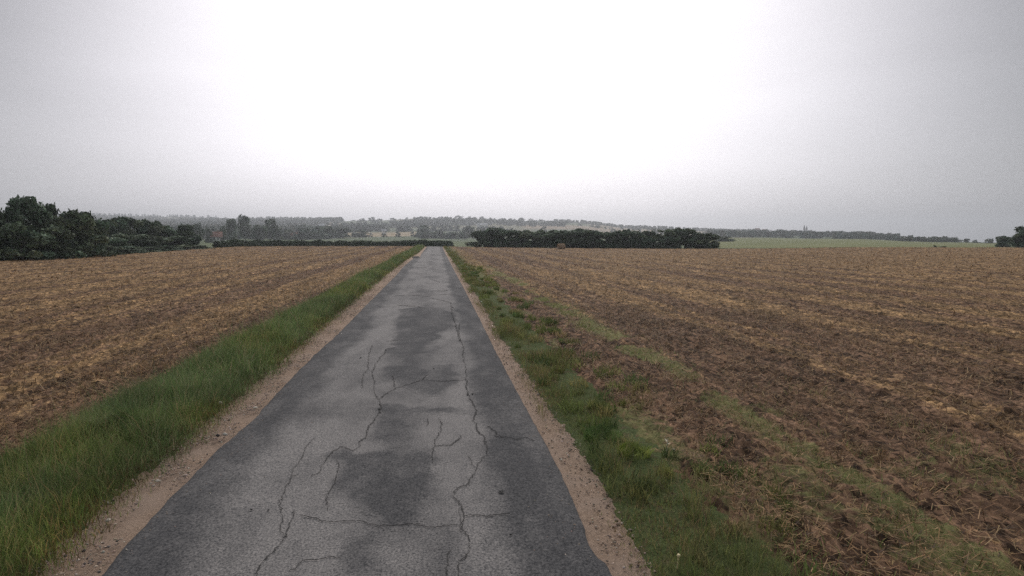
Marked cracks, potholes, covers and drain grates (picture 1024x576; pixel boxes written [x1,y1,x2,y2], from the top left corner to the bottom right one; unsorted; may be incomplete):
crack [256,279,535,576]
